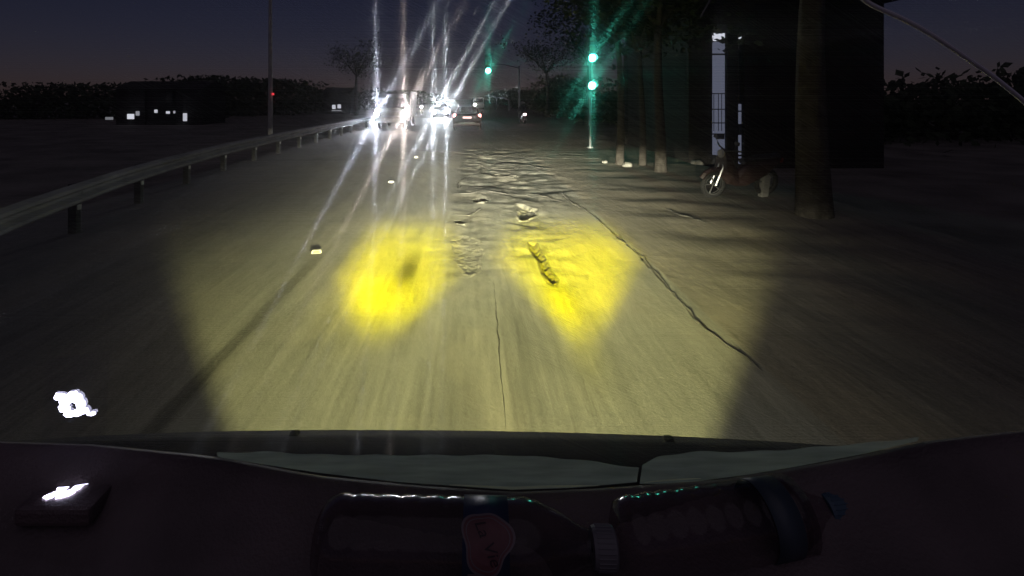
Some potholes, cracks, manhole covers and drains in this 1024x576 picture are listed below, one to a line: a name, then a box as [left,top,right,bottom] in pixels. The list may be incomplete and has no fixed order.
crack [419,150,762,371]
pothole [450,235,485,277]
pothole [514,204,539,222]
pothole [527,242,560,288]
